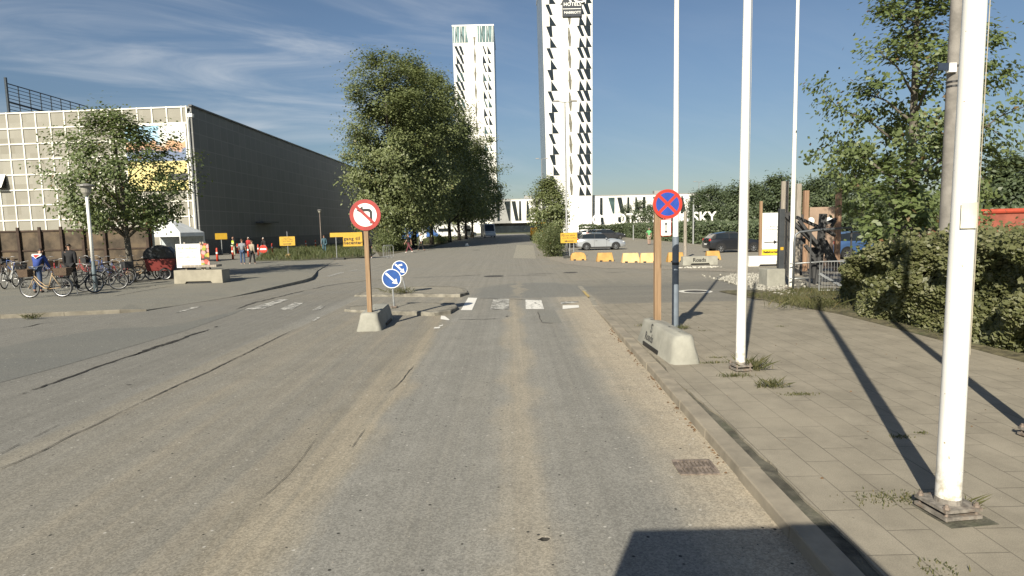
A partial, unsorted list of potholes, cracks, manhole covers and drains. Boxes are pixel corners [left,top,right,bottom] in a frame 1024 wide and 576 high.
drain grate [672,459,720,475]
